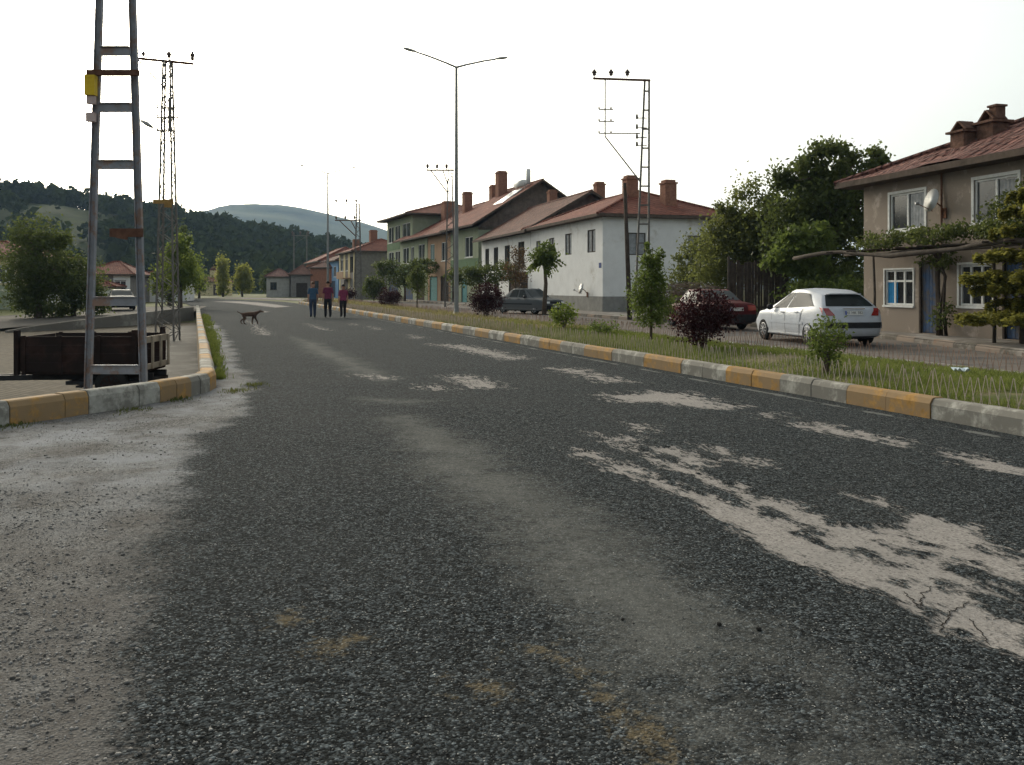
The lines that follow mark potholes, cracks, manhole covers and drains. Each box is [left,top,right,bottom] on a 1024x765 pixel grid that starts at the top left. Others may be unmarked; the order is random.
crack [904,586,1001,645]
